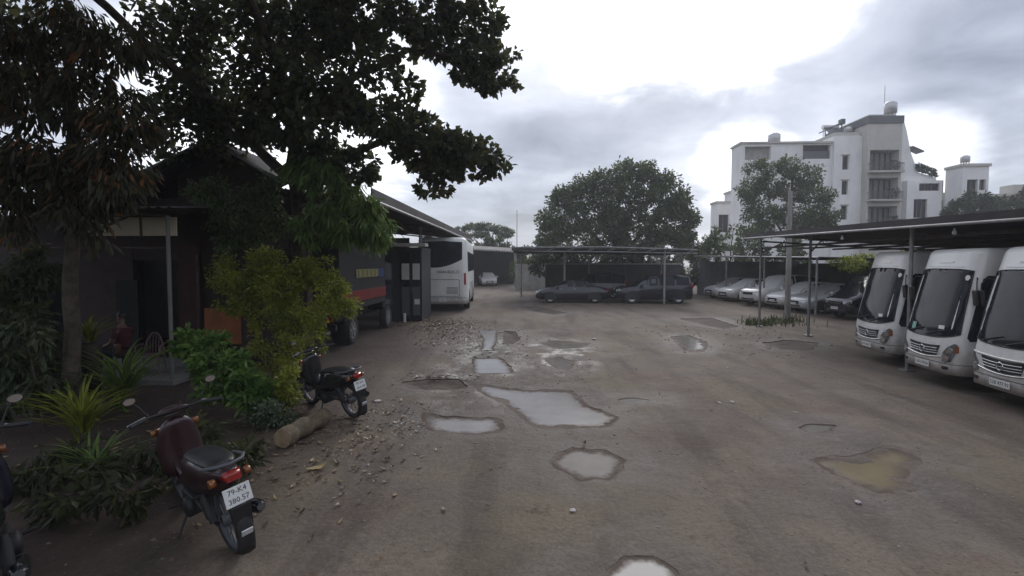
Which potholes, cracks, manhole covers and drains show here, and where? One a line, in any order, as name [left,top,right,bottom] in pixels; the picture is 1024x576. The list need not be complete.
pothole [798,424,837,433]
pothole [548,447,627,482]
pothole [419,408,505,435]
pothole [471,357,514,374]
pothole [401,378,468,390]
pothole [671,335,708,352]
pothole [478,329,498,351]
pothole [604,555,680,576]
pothole [762,340,819,351]
pothole [469,383,620,429]
pothole [809,447,923,496]
pothole [502,331,520,344]
